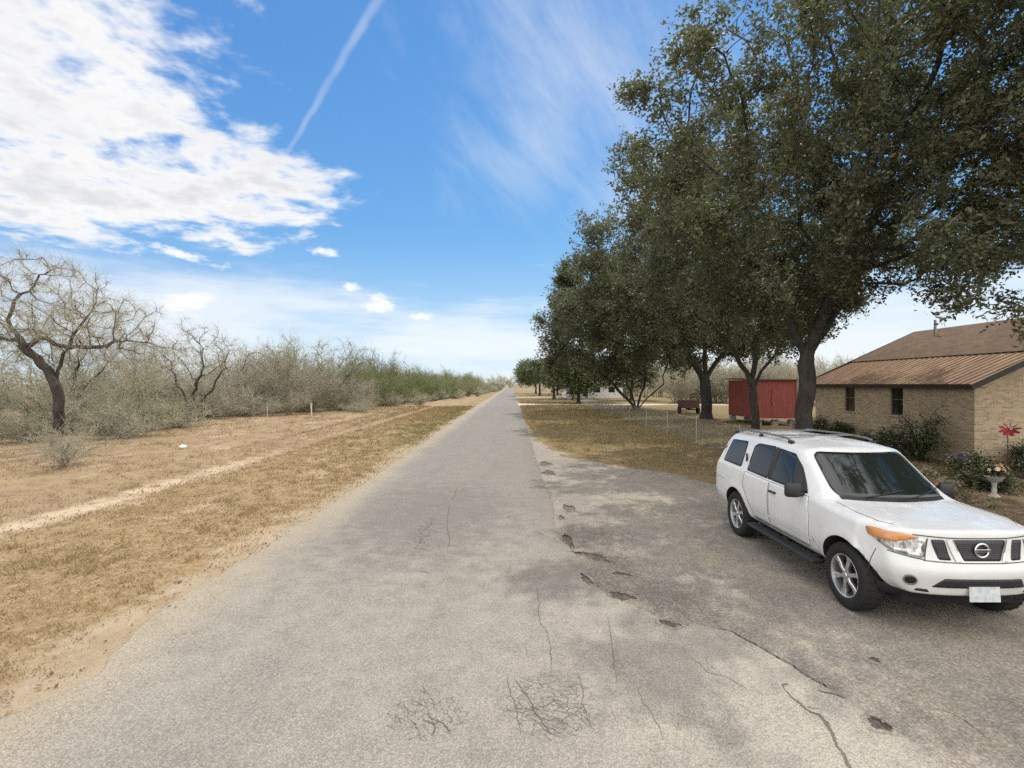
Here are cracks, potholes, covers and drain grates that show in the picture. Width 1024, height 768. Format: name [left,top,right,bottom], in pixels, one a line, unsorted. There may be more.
pothole [654,618,687,630]
pothole [560,504,578,513]
pothole [577,571,598,586]
pothole [606,590,641,603]
pothole [859,712,902,736]
crack [503,589,601,741]
pothole [559,533,576,549]
crack [713,627,852,768]
pothole [568,550,614,564]
crack [387,685,469,740]
crack [407,485,463,556]
